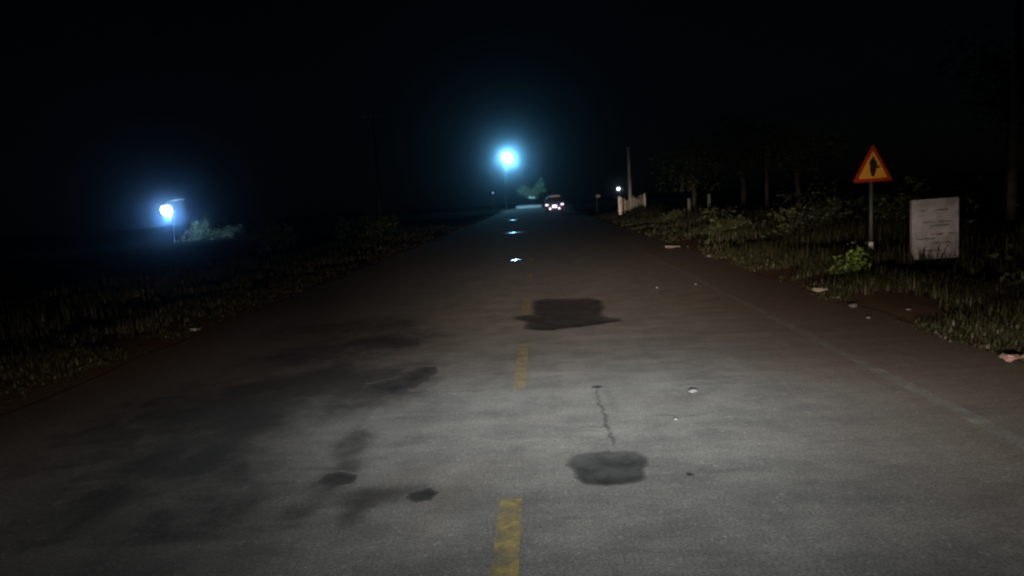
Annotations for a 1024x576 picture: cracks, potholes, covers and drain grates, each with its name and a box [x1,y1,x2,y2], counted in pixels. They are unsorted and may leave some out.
pothole [406,487,440,502]
pothole [564,449,651,486]
pothole [362,366,439,394]
pothole [319,471,358,488]
